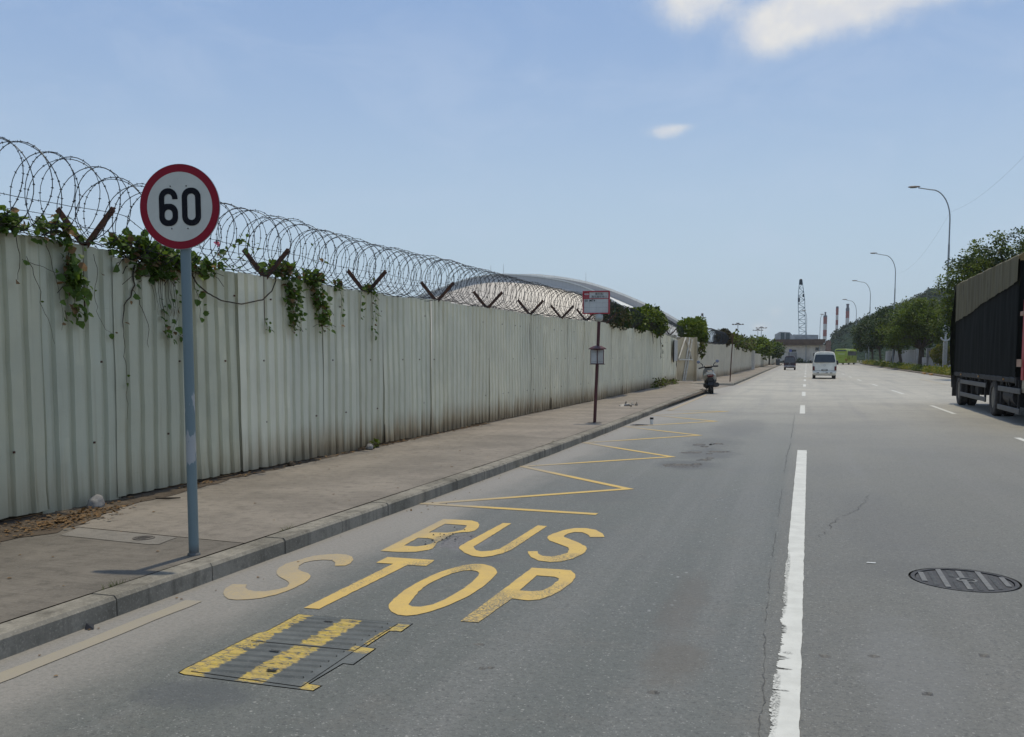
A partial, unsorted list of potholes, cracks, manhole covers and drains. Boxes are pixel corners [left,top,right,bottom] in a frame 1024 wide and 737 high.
manhole cover [908,568,1022,593]
